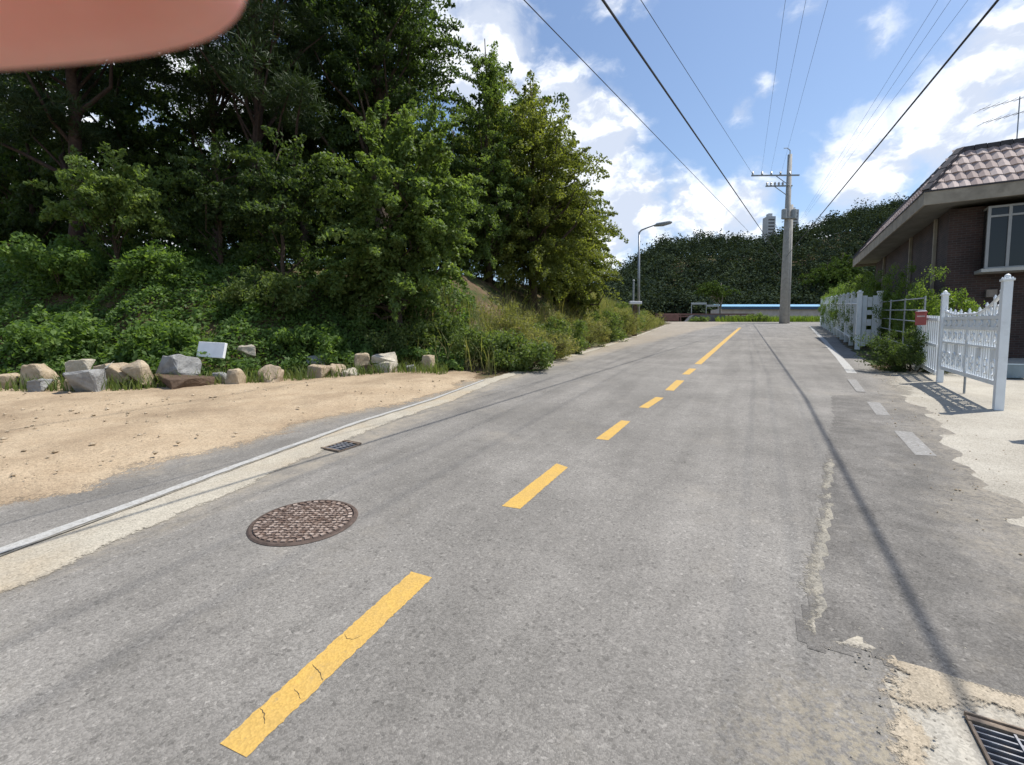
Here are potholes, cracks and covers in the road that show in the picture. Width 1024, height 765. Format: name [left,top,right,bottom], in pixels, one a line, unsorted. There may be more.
manhole cover [246,500,358,546]
drain grate [321,440,362,453]
drain grate [964,711,1024,765]
